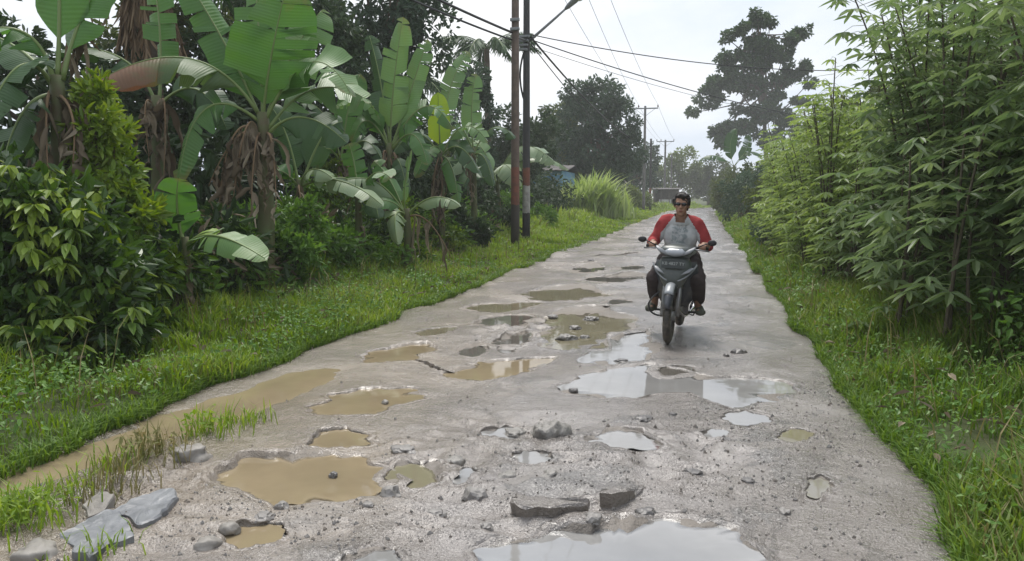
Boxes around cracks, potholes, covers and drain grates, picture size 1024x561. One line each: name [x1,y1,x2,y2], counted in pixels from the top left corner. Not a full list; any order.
pothole [355,340,443,364]
pothole [510,282,618,303]
pothole [454,302,549,313]
pothole [801,472,842,502]
pothole [211,516,296,551]
pothole [372,457,460,494]
pothole [572,327,671,370]
pothole [200,446,413,508]
pothole [712,408,780,429]
pothole [576,424,673,453]
pothole [550,361,804,411]
pothole [464,512,778,561]
